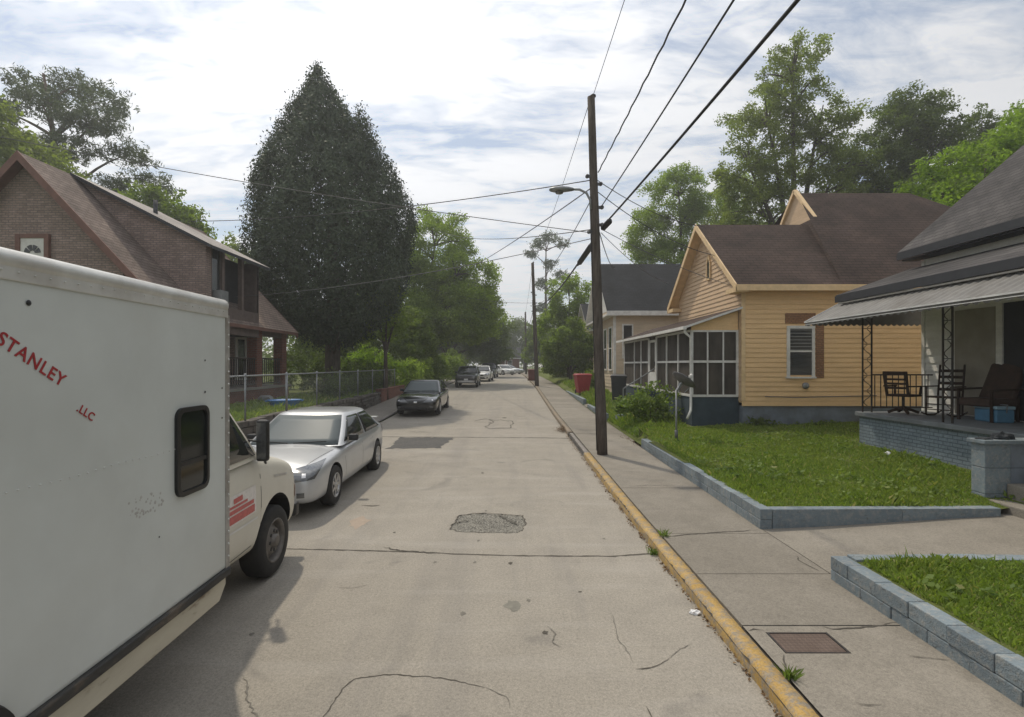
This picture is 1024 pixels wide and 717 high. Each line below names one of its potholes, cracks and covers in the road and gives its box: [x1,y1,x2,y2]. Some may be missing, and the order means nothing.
manhole cover [766,632,850,653]
crack [323,674,510,717]
crack [243,677,258,717]
crack [612,615,688,669]
